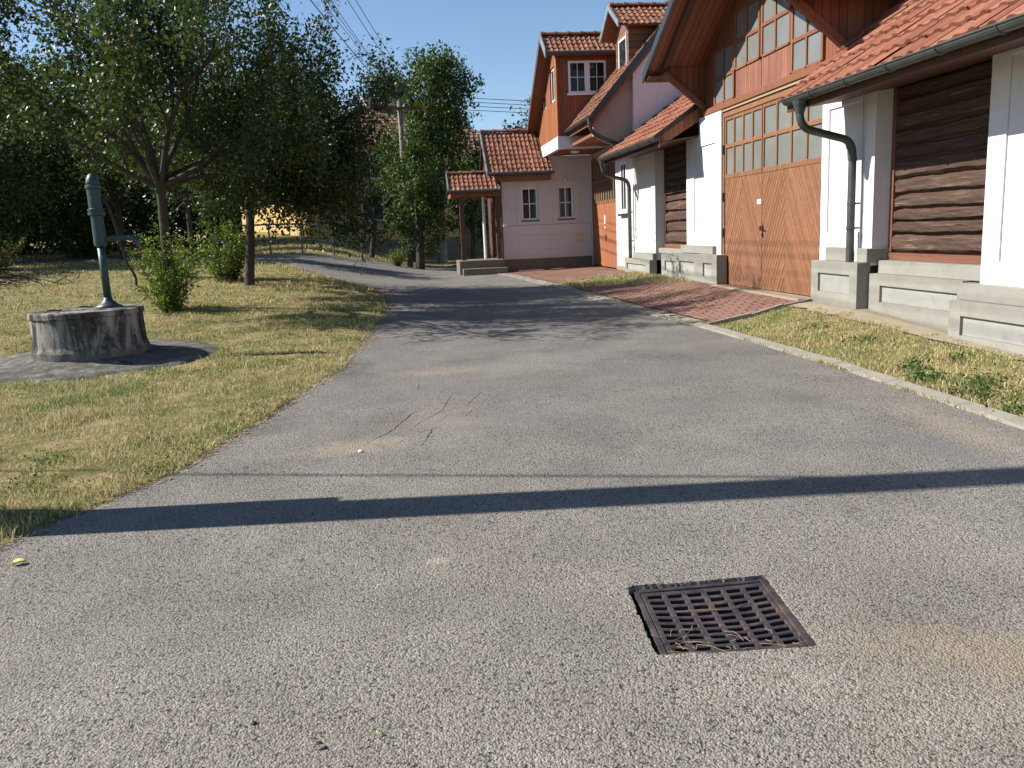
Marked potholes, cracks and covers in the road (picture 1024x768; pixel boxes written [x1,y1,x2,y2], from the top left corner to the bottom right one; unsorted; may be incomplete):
drain grate [633,578,817,655]
crack [366,393,479,446]
